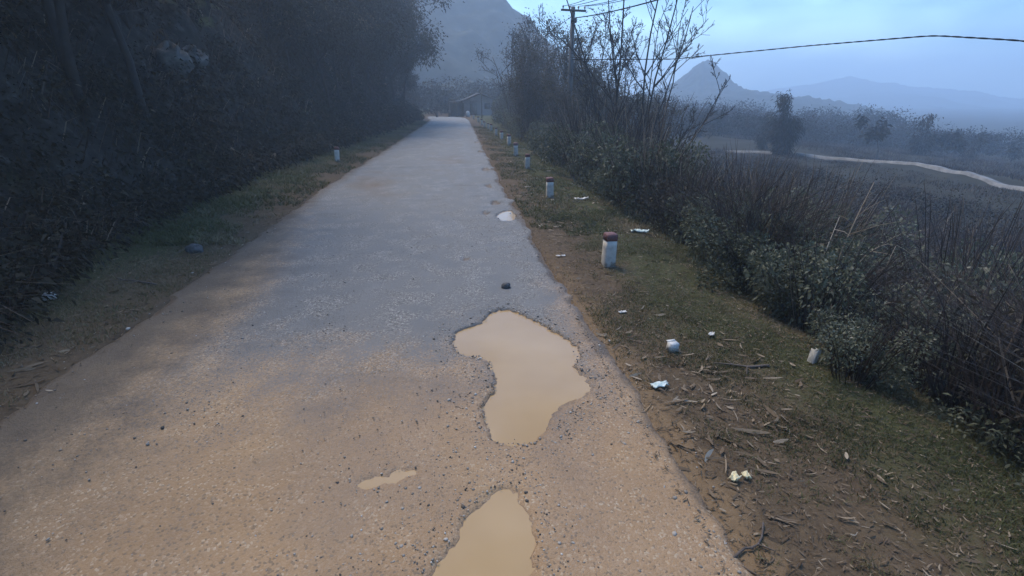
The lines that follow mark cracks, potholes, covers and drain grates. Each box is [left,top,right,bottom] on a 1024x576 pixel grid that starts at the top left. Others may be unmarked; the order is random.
pothole [446,306,609,450]
pothole [409,476,552,576]
pothole [492,209,520,221]
pothole [346,459,428,495]
